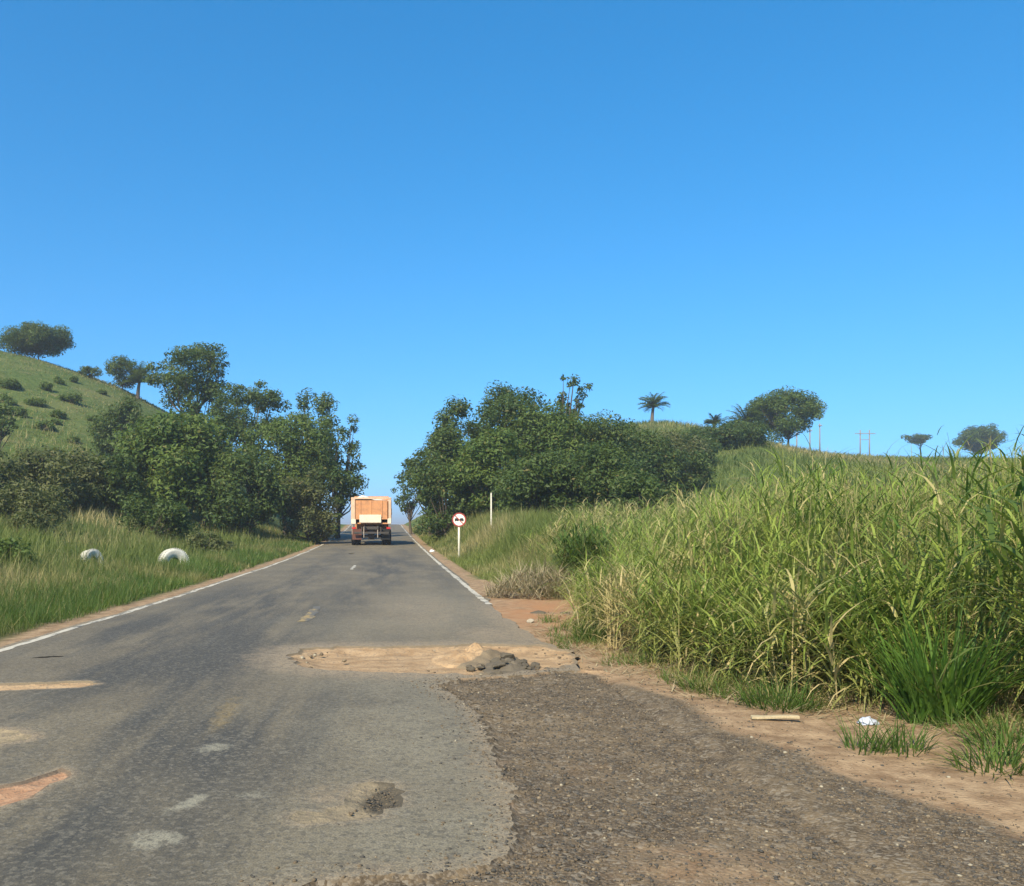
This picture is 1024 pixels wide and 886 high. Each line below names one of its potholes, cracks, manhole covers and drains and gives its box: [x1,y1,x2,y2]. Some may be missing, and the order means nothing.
pothole [286,643,580,675]
